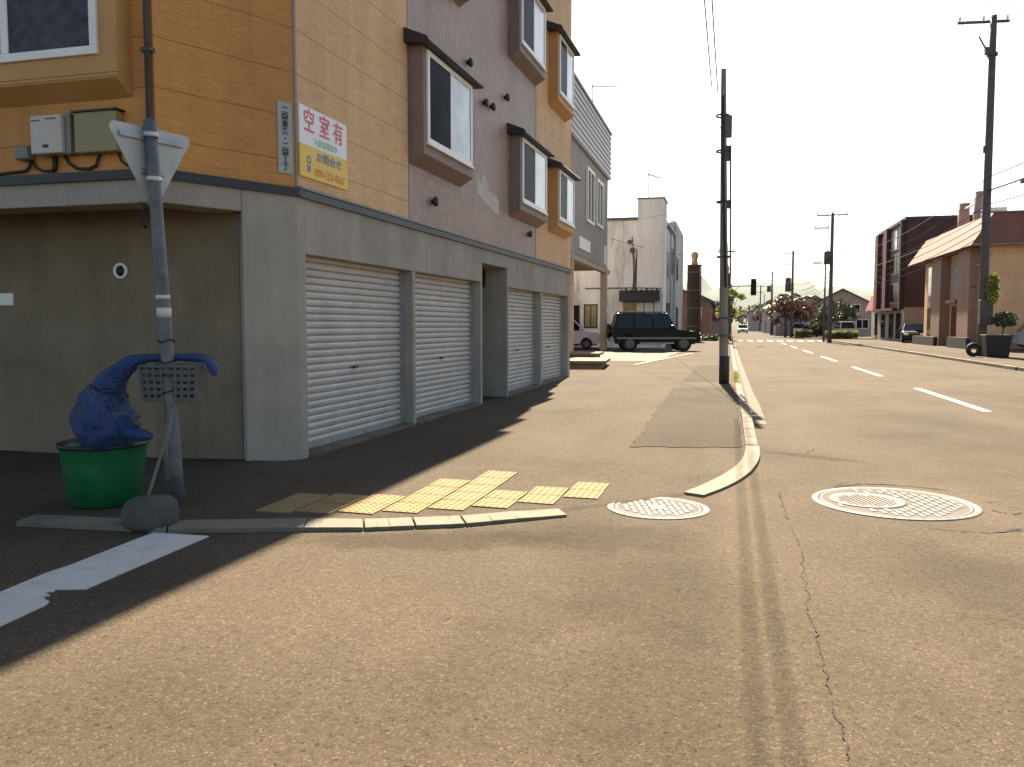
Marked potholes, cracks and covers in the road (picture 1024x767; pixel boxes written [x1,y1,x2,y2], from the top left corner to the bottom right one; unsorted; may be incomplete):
manhole cover [811,487,983,521]
crack [779,491,852,767]
manhole cover [607,497,710,520]
crack [928,501,1023,533]
